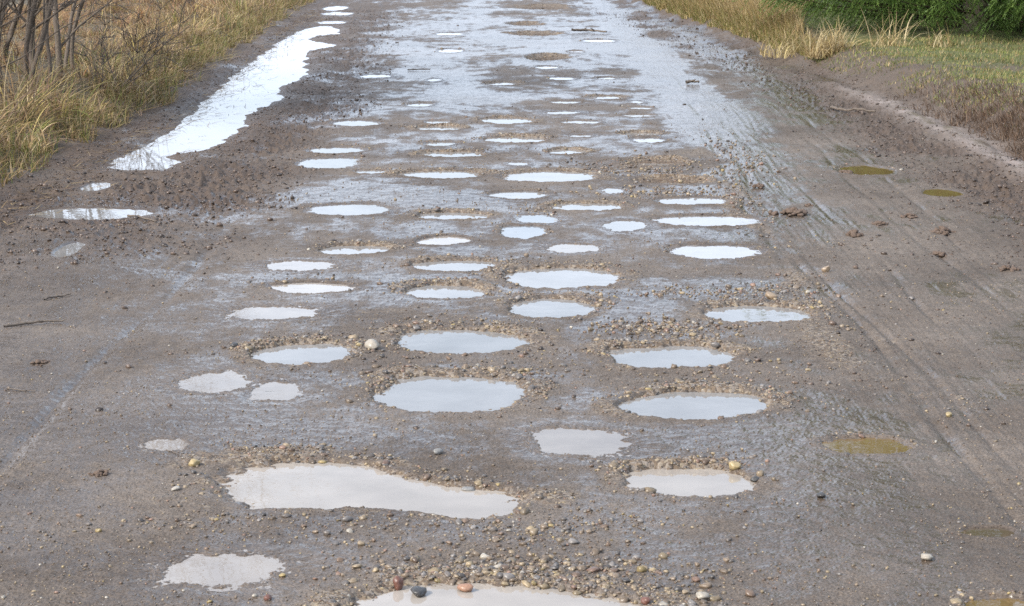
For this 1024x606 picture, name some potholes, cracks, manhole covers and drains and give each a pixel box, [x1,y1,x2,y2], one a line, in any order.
pothole [599,382,788,424]
pothole [688,299,826,324]
pothole [196,300,353,325]
pothole [315,569,683,606]
pothole [147,362,274,400]
pothole [236,373,316,406]
pothole [236,337,365,367]
